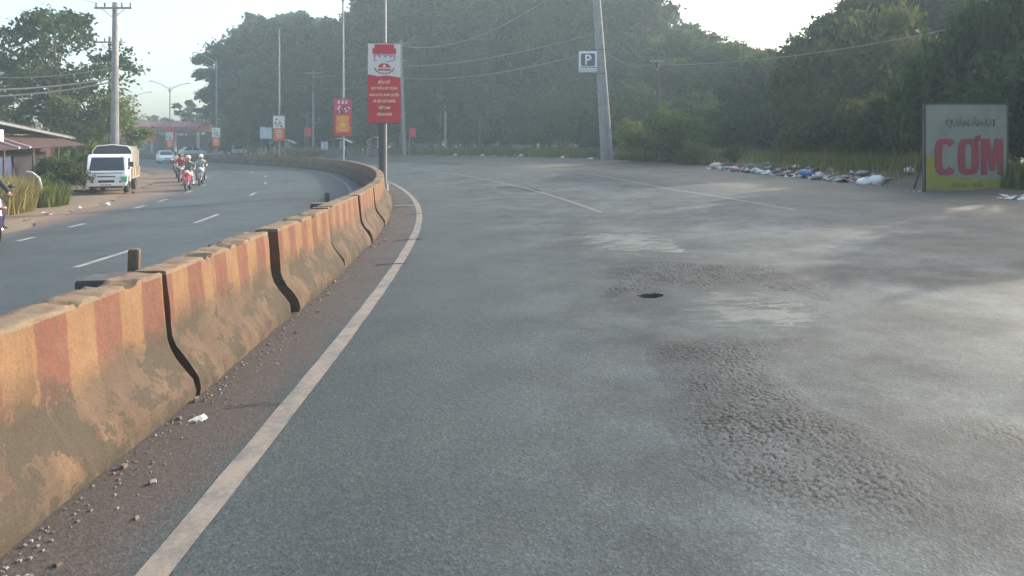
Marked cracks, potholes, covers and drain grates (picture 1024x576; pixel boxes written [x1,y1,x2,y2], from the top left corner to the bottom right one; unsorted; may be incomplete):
crack [644,333,1024,532]
crack [589,260,838,311]
